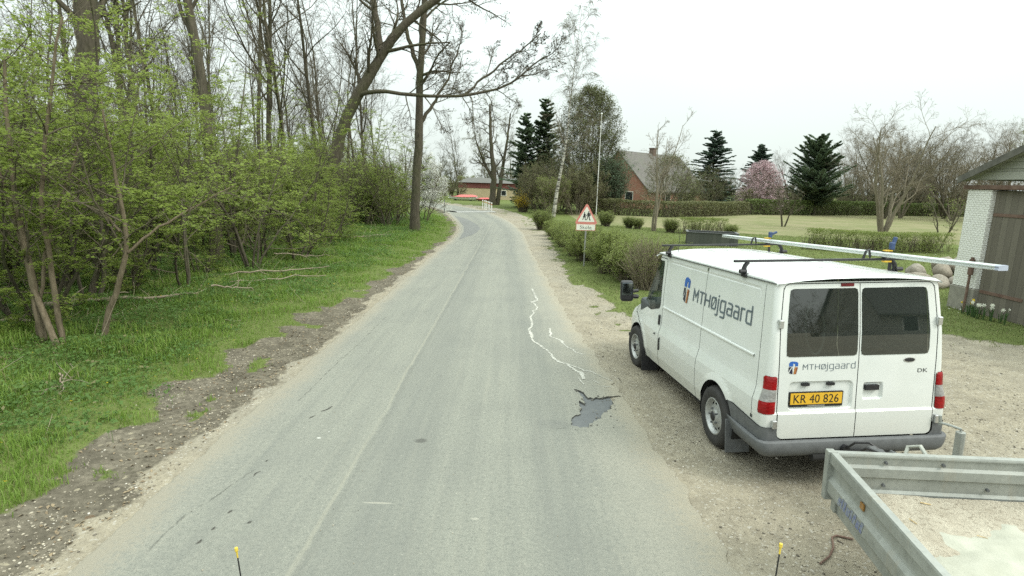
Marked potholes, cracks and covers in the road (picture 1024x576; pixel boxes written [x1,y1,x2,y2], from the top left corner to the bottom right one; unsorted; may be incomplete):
pothole [571,389,621,428]
crack [528,289,612,387]
